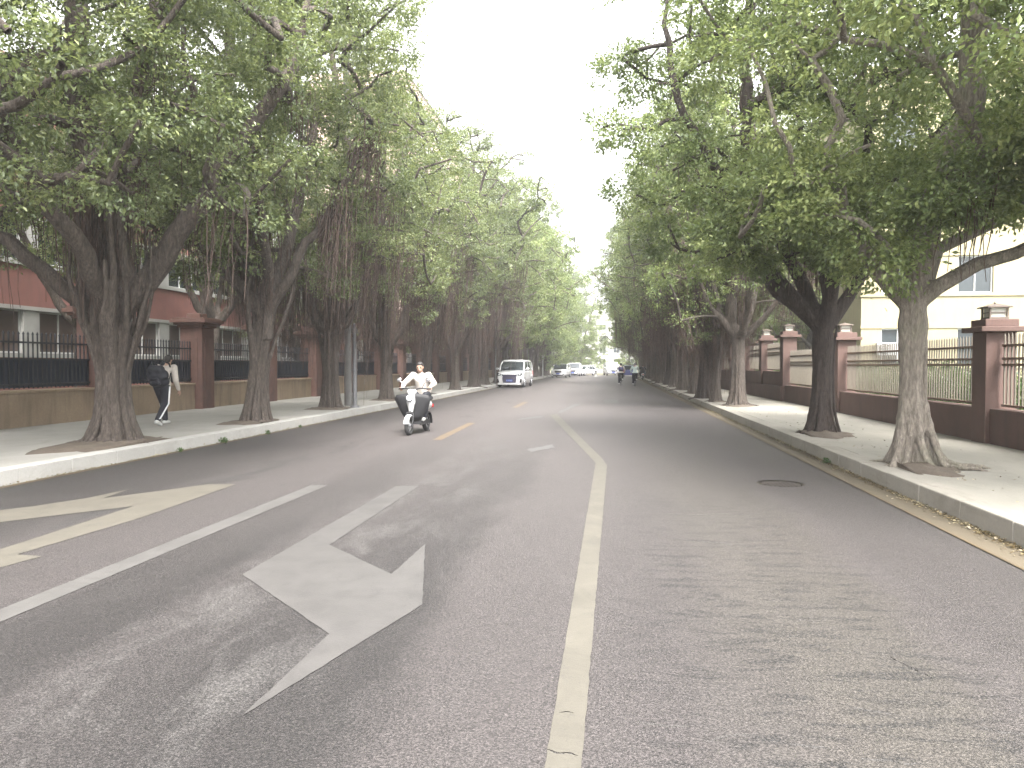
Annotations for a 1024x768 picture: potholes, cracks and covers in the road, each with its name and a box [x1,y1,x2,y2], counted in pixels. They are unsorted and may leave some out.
crack [890,656,932,678]
